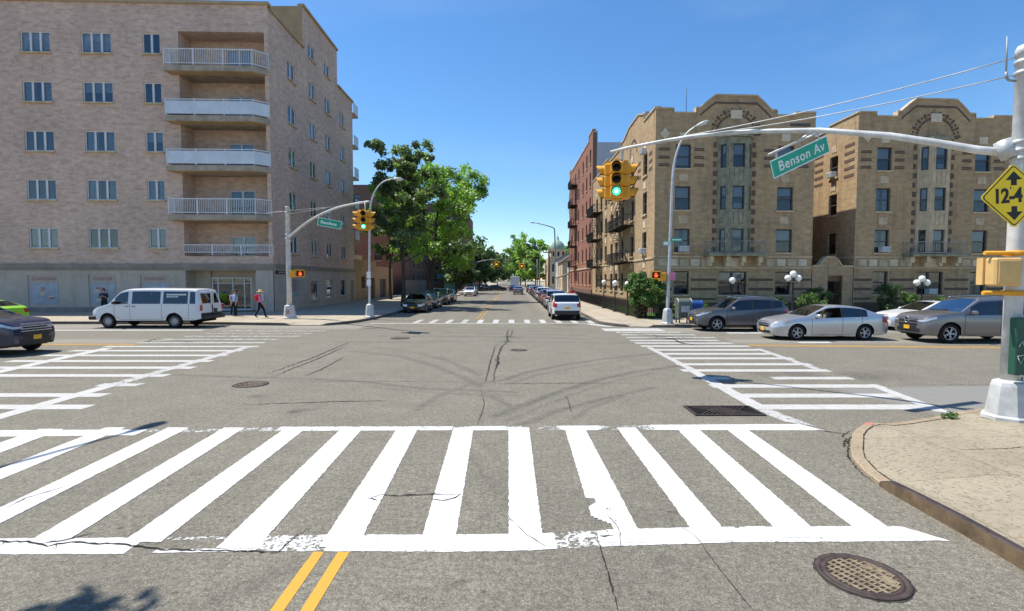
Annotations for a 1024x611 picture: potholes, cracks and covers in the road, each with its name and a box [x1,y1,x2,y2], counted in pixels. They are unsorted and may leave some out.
crack [371,493,460,501]
drain grate [683,405,767,416]
crack [0,528,308,552]
crack [822,430,871,480]
manhole cover [812,553,917,603]
crack [684,528,749,605]
crack [596,516,621,611]
crack [485,329,513,380]
